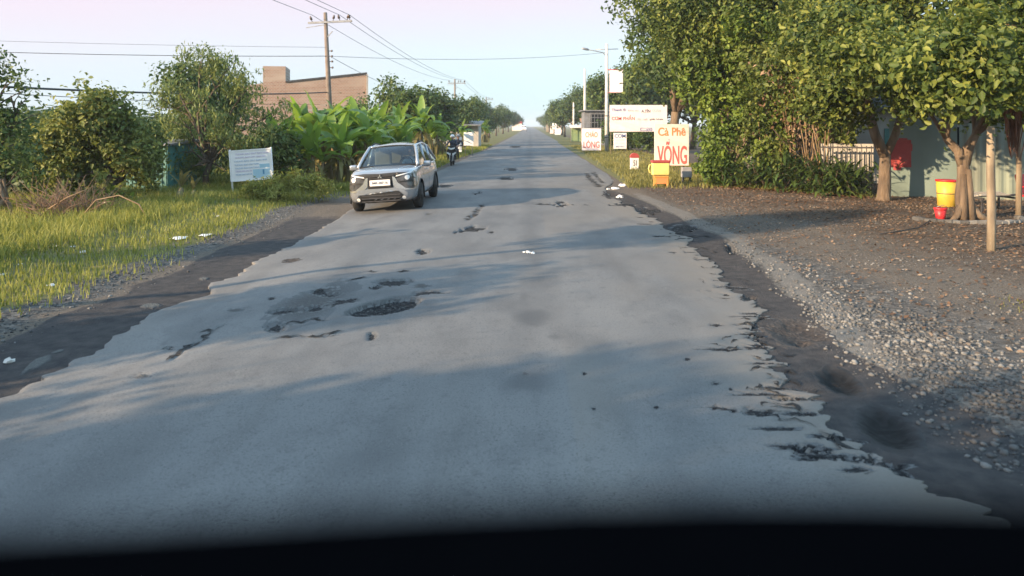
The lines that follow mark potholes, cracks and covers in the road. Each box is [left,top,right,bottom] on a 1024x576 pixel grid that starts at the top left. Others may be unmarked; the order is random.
pothole [371,279,413,287]
pothole [812,364,867,399]
pothole [345,296,422,317]
crack [163,325,224,360]
pothole [852,403,928,457]
crack [712,304,874,463]
